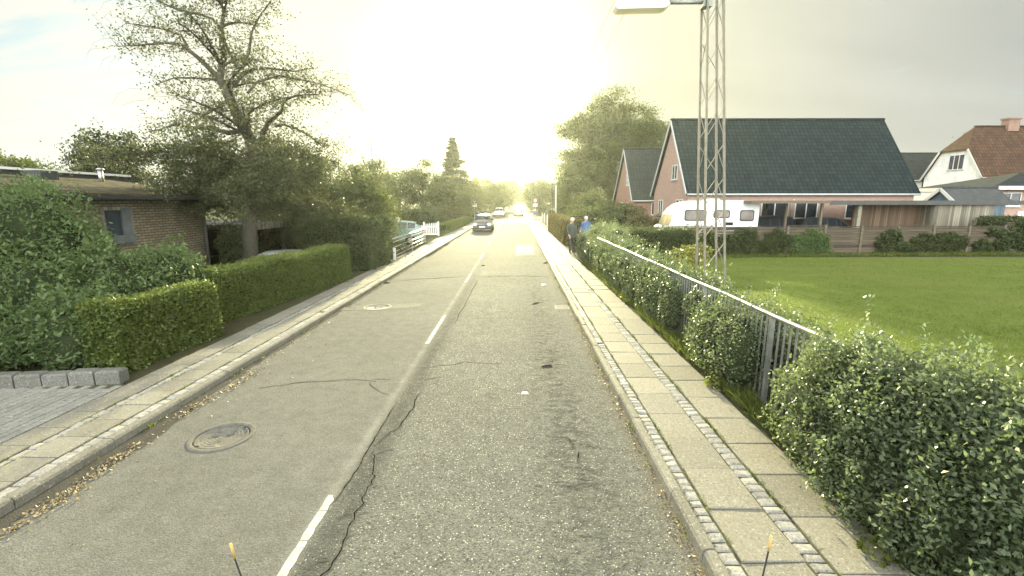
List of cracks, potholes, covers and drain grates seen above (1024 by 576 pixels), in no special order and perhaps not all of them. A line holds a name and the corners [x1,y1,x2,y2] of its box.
crack [528,433,602,490]
crack [260,361,501,576]
manhole cover [185,422,256,453]
